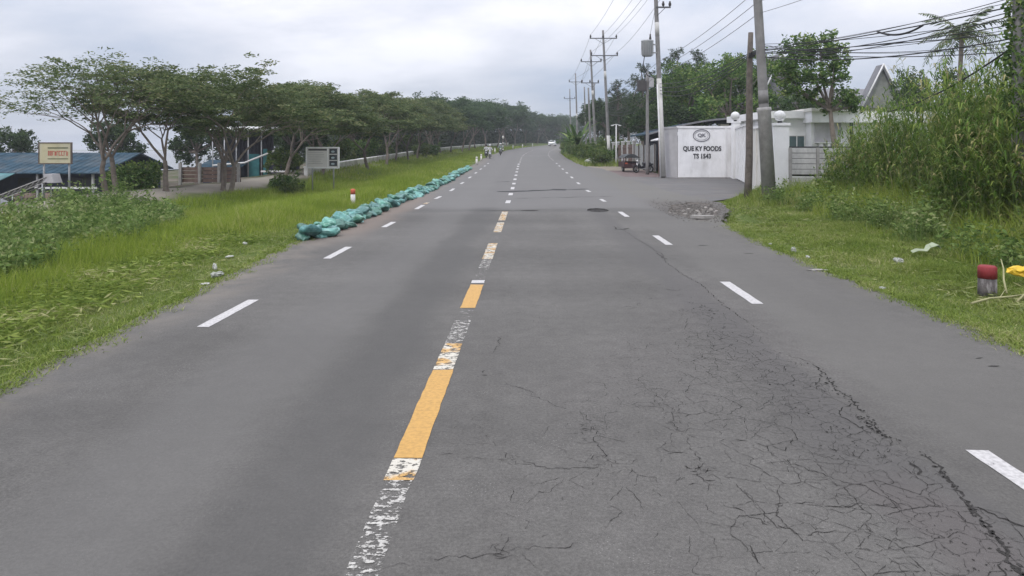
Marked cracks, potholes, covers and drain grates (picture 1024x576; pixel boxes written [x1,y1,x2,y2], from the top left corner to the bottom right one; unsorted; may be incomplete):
crack [510,297,1024,576]
crack [440,386,632,474]
crack [389,540,577,567]
pothole [668,202,721,220]
